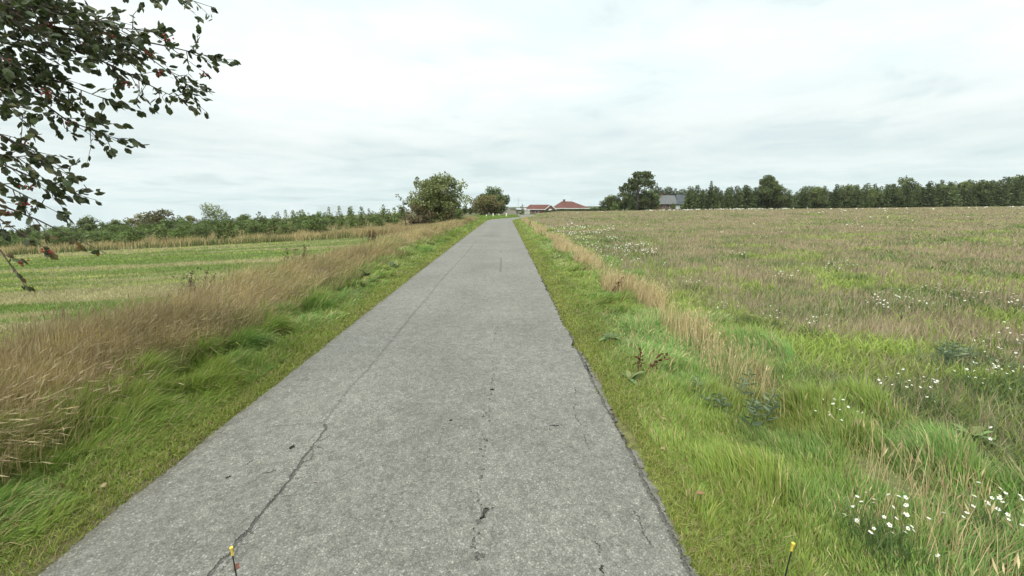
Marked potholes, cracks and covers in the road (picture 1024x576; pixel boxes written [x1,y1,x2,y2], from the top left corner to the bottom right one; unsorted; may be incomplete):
crack [549,332,692,576]
